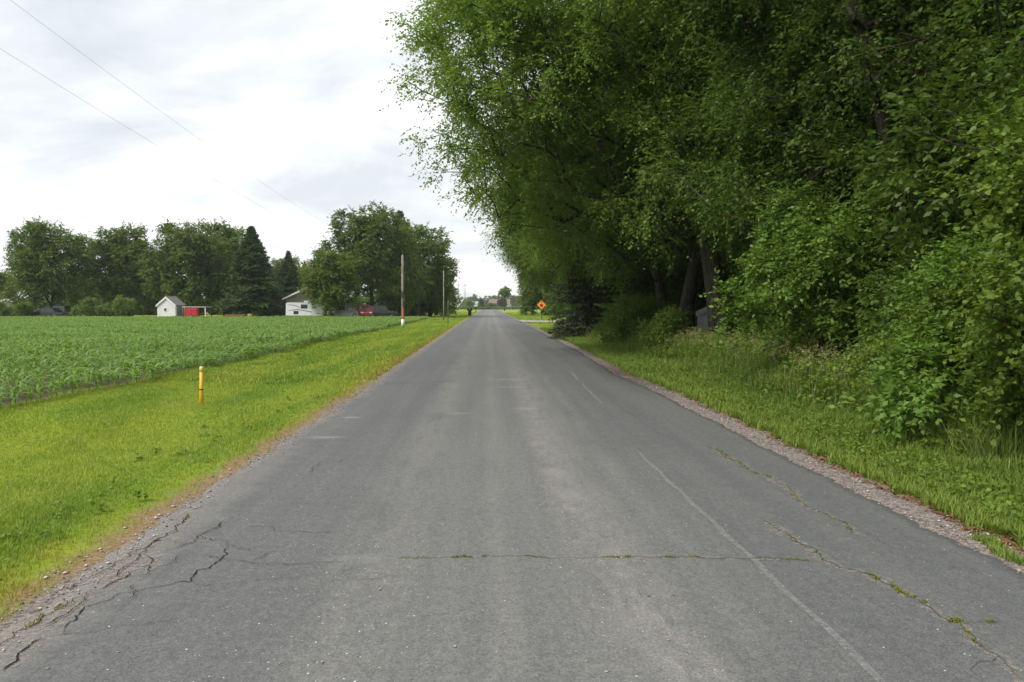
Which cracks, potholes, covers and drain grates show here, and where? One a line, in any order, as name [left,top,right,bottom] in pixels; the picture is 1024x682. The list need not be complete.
crack [331,515,1024,682]
crack [0,514,364,670]
crack [707,445,875,544]
